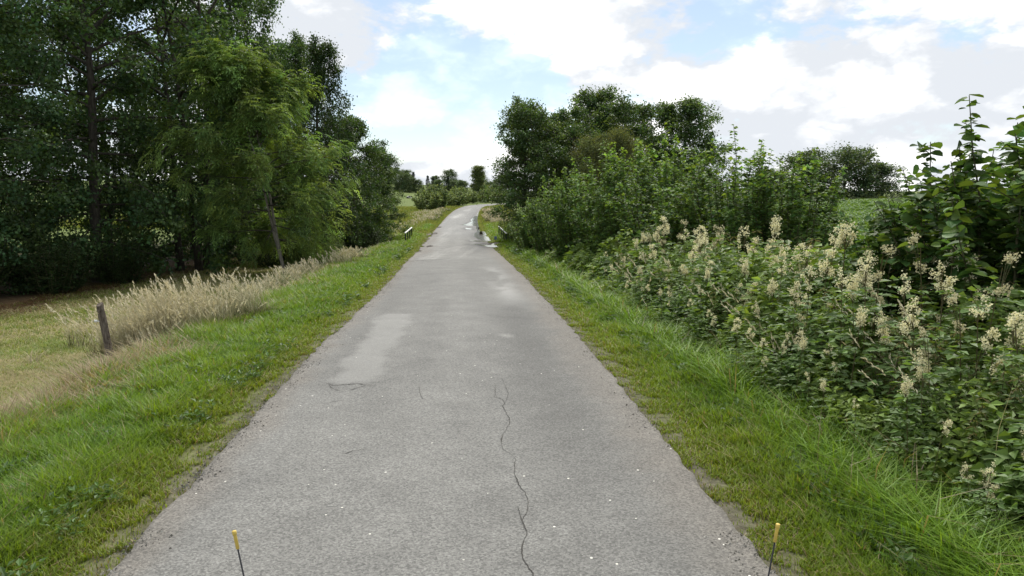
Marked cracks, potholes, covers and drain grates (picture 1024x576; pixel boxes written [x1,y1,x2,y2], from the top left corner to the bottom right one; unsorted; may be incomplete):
crack [494,379,534,576]
